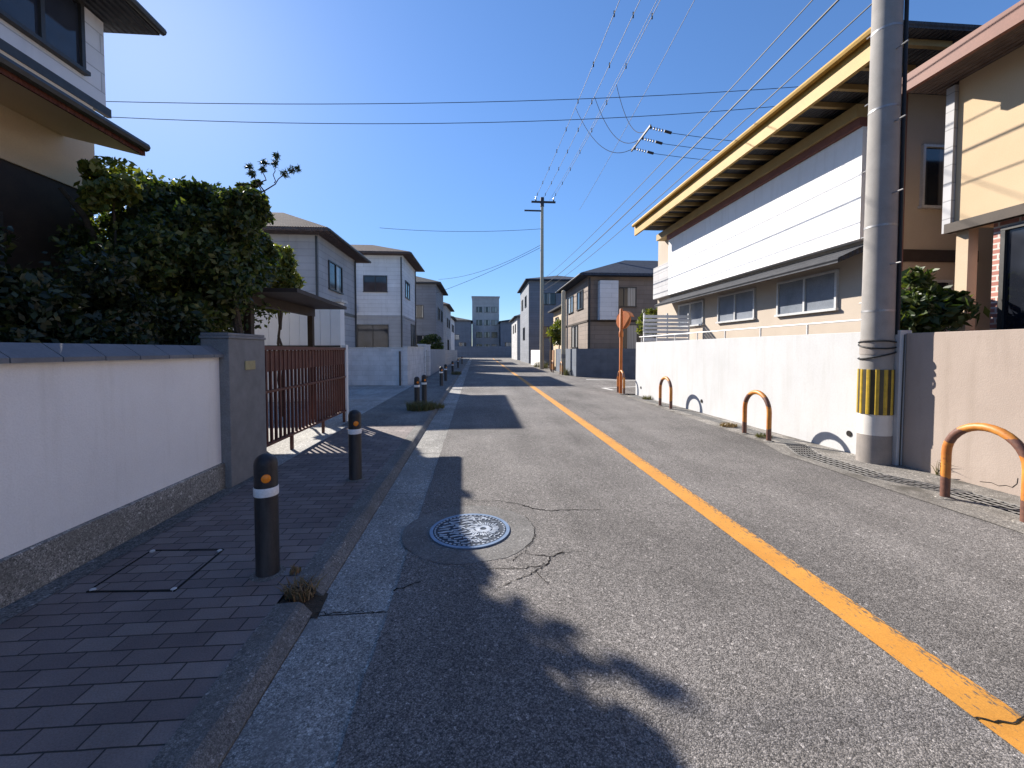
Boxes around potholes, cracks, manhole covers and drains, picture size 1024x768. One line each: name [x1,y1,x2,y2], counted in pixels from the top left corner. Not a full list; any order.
drain grate [799,454,888,476]
drain grate [785,444,820,455]
crack [467,500,600,587]
drain grate [866,475,969,493]
drain grate [950,492,1020,516]
utility cover [86,549,224,592]
crack [975,716,1024,724]
manhole cover [430,513,510,549]
